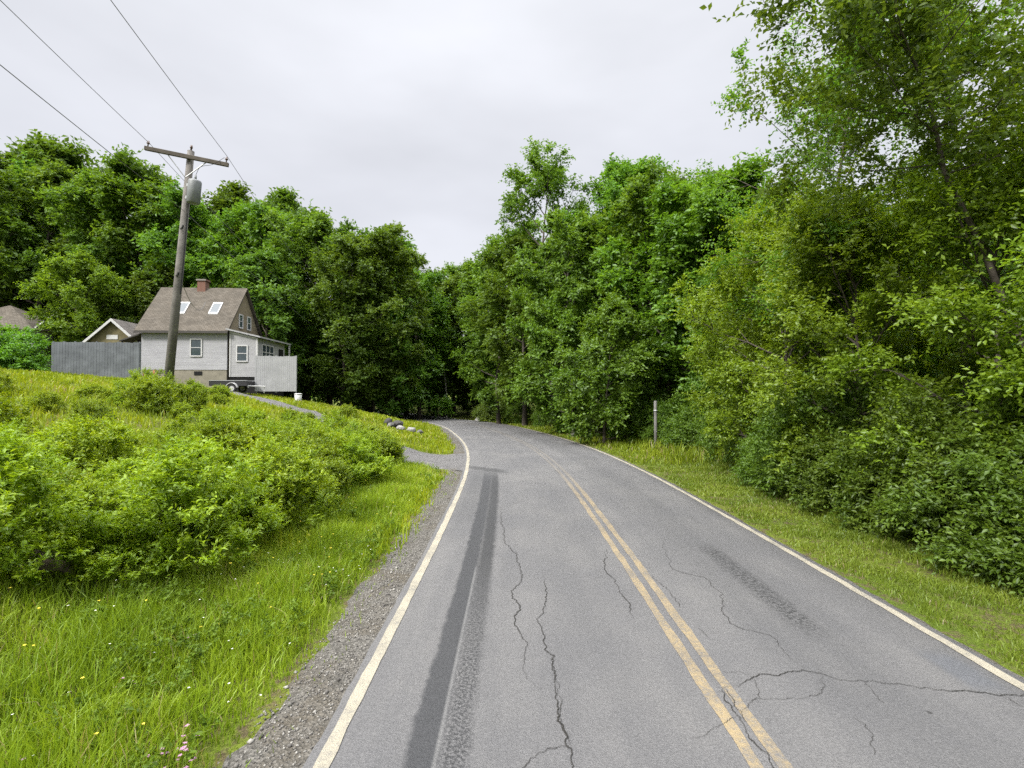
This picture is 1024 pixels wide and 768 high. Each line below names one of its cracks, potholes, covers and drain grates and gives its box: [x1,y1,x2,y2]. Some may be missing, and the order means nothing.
crack [652,534,803,667]
crack [500,517,574,768]
crack [689,669,1024,768]
